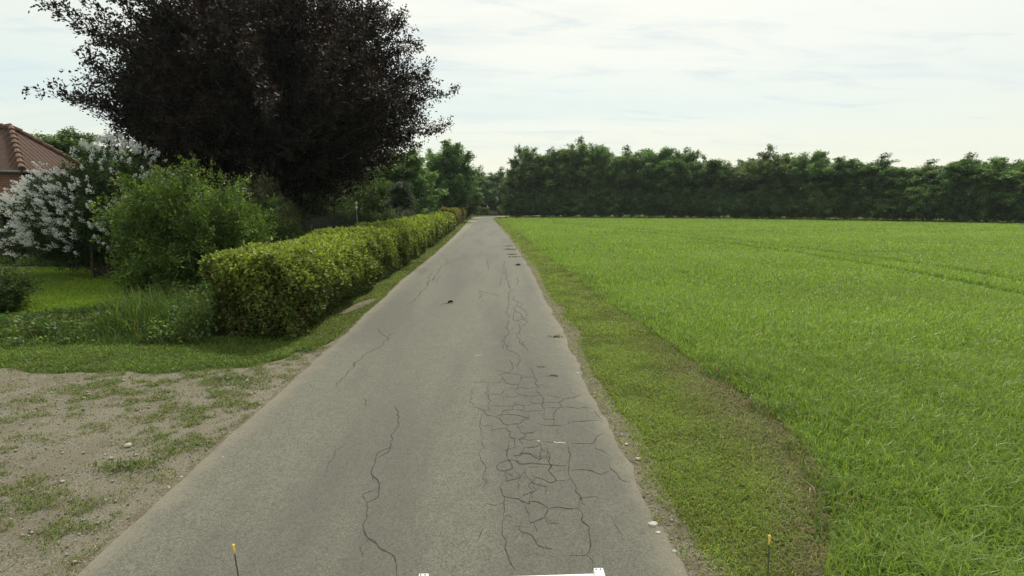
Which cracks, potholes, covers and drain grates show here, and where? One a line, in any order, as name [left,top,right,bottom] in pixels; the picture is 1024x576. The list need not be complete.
crack [334,329,391,389]
crack [359,405,400,576]
